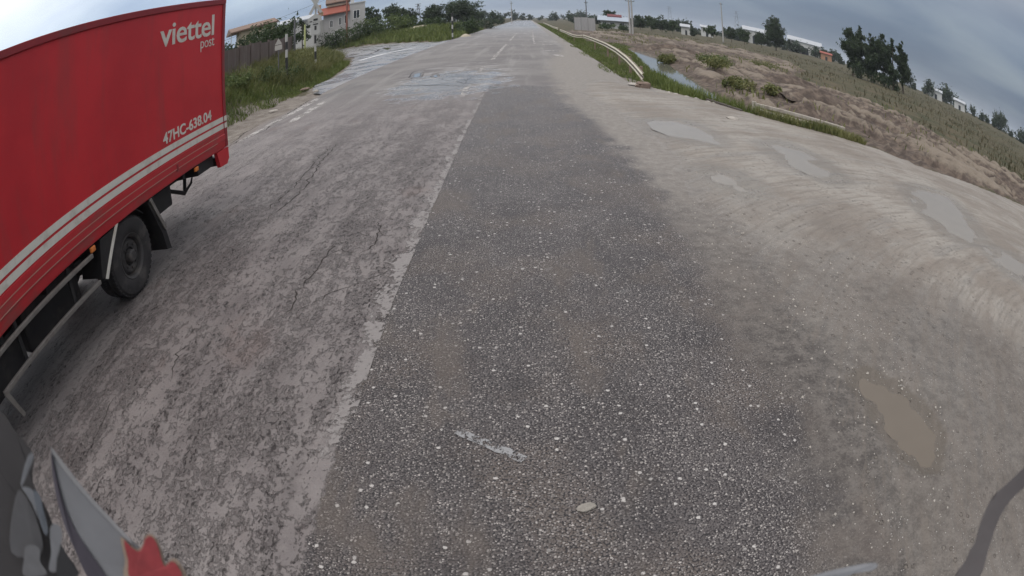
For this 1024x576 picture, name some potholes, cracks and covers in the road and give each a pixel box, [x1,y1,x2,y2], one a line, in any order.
pothole [859,378,936,468]
crack [257,145,336,226]
crack [287,217,390,312]
